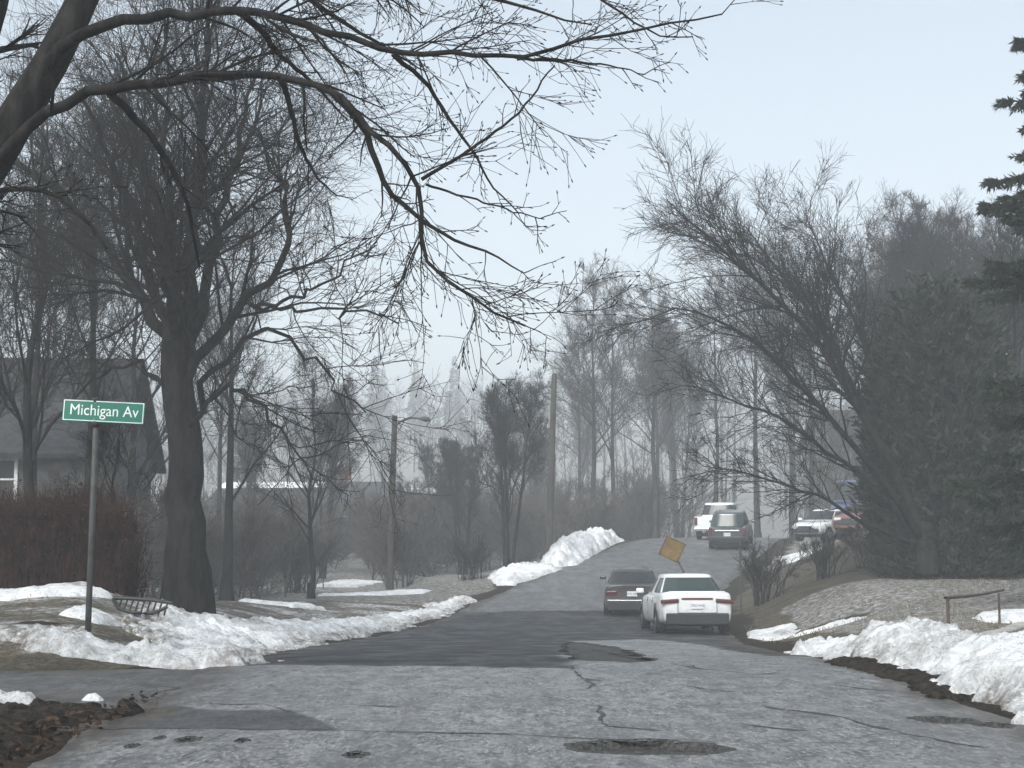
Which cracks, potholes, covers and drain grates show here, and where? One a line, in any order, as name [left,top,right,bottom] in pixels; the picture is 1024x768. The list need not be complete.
pothole [556,642,658,663]
pothole [906,716,981,724]
pothole [563,738,737,755]
crack [747,705,988,748]
crack [349,665,661,741]
pothole [341,750,371,758]
